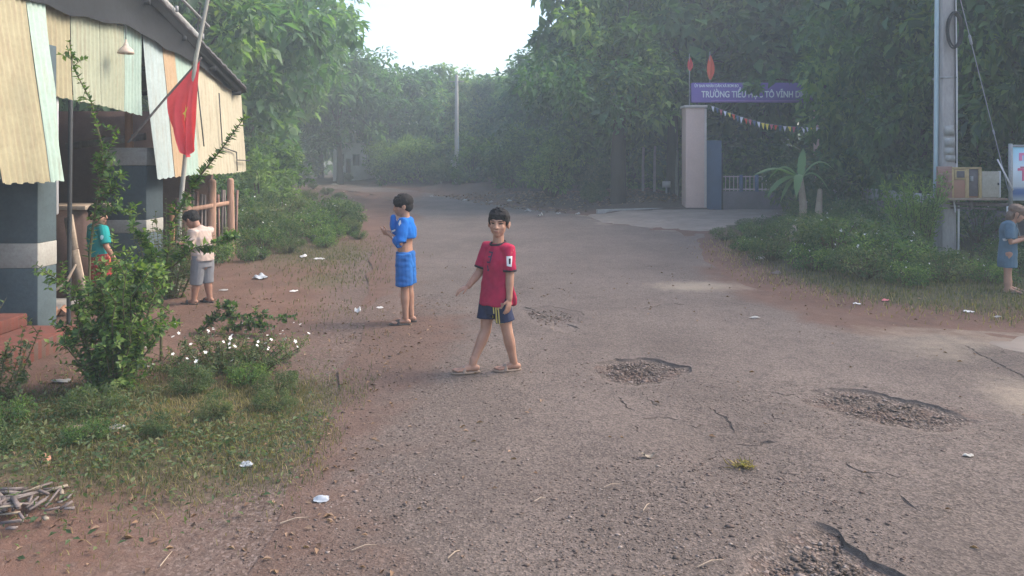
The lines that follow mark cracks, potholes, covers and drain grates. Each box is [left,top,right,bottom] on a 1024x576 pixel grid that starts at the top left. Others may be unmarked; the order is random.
pothole [790,387,982,435]
pothole [734,521,906,576]
crack [967,346,1024,378]
pothole [586,357,692,387]
pothole [520,306,585,333]
crack [618,397,774,447]
crack [845,462,904,478]
